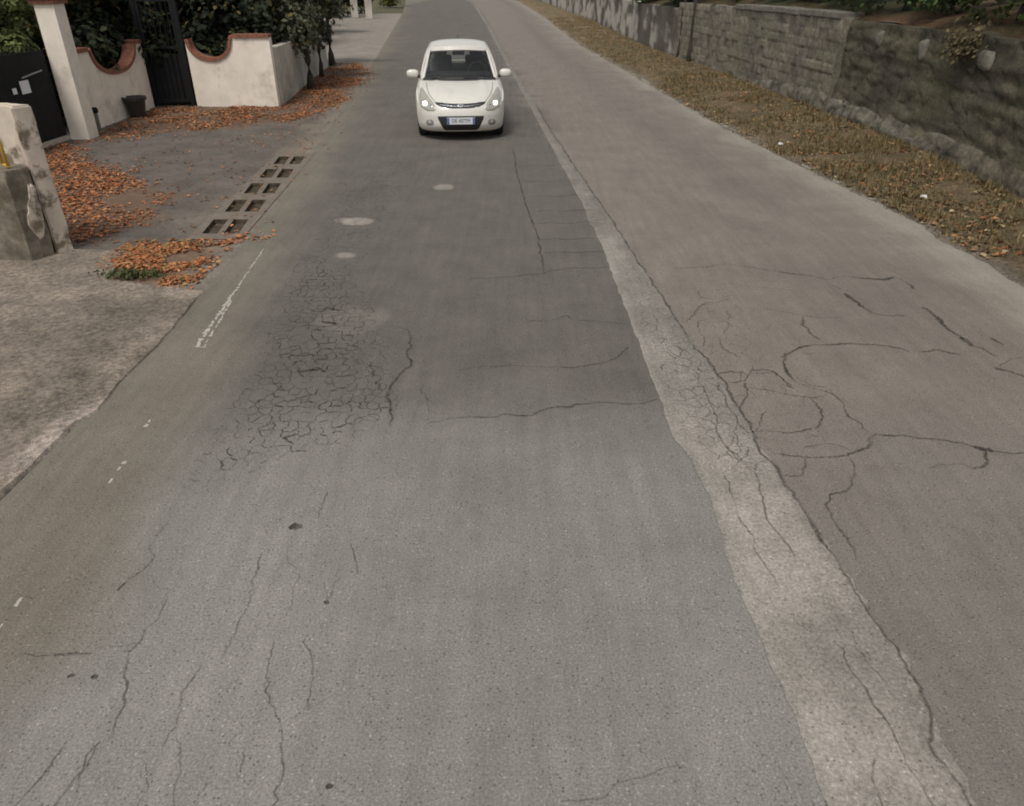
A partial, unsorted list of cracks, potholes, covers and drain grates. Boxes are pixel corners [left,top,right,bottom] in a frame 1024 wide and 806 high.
drain grate [186,154,314,239]
crack [697,298,997,506]
crack [220,270,387,470]
